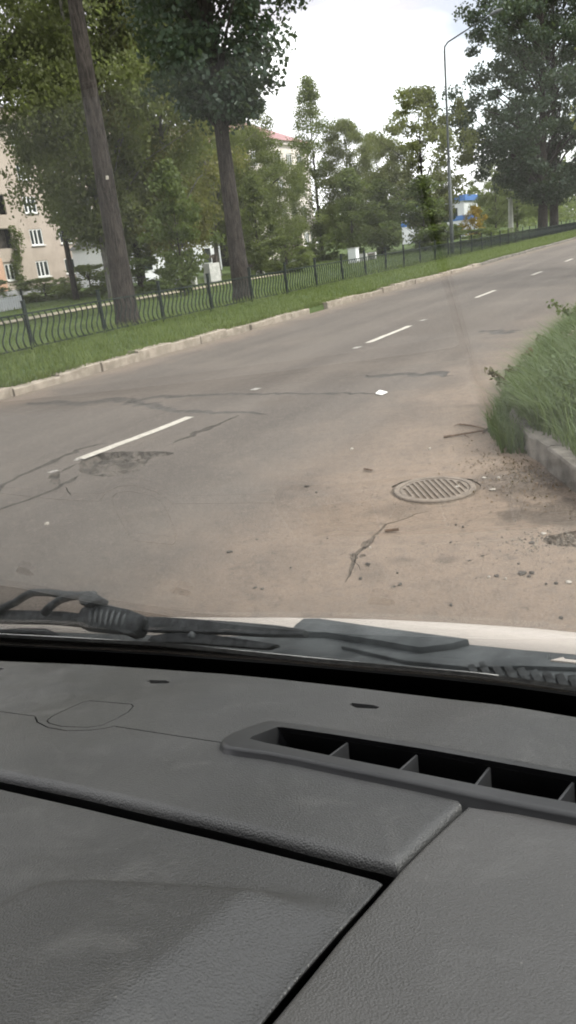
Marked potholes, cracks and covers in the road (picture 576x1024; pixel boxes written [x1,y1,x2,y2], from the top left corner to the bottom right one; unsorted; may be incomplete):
crack [25,371,454,445]
crack [0,443,105,510]
pothole [542,531,576,547]
pothole [78,451,173,477]
crack [345,511,427,582]
